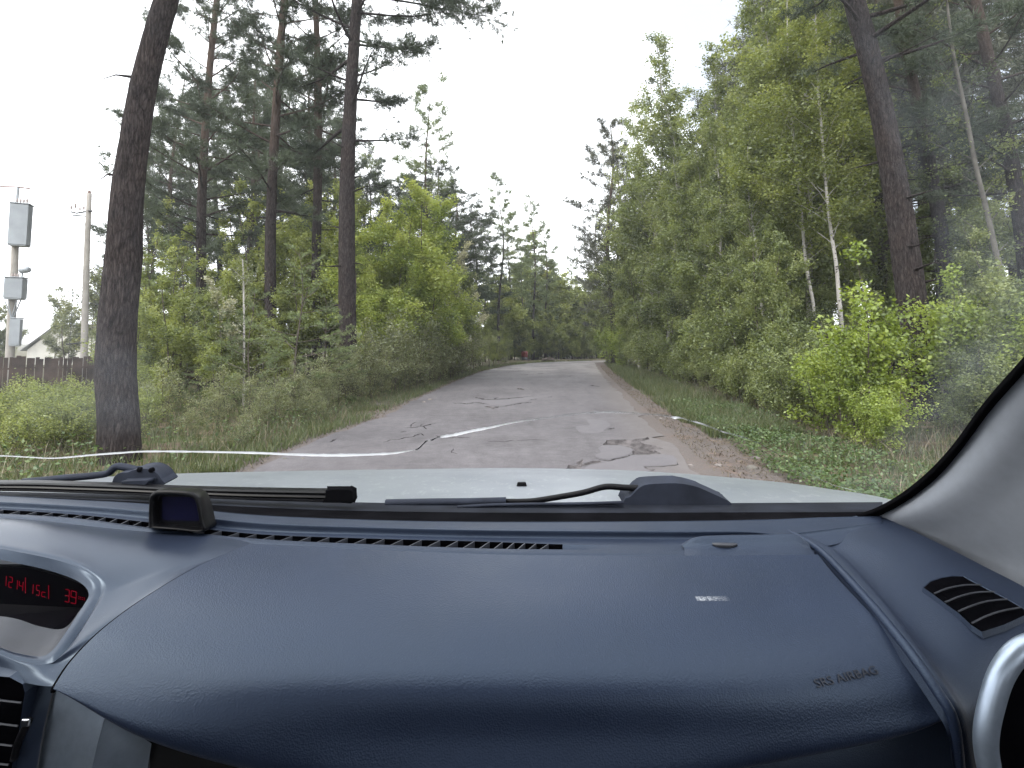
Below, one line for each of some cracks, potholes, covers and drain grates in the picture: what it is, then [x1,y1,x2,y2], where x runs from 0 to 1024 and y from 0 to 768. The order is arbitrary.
pothole [603,437,663,455]
crack [386,422,468,454]
crack [455,396,534,407]
